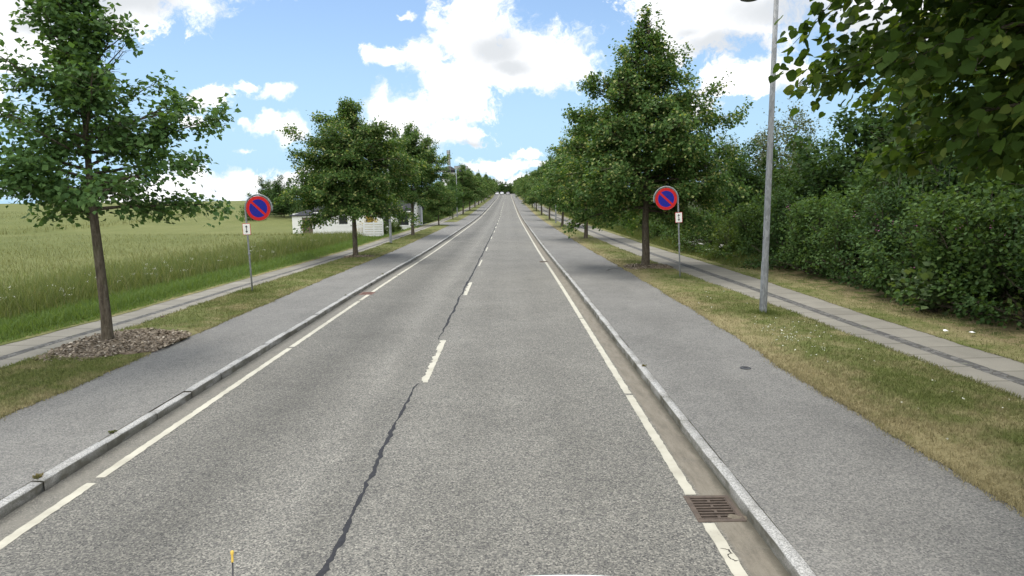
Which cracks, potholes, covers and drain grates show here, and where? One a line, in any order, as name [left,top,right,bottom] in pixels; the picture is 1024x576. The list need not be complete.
drain grate [683,495,747,522]
